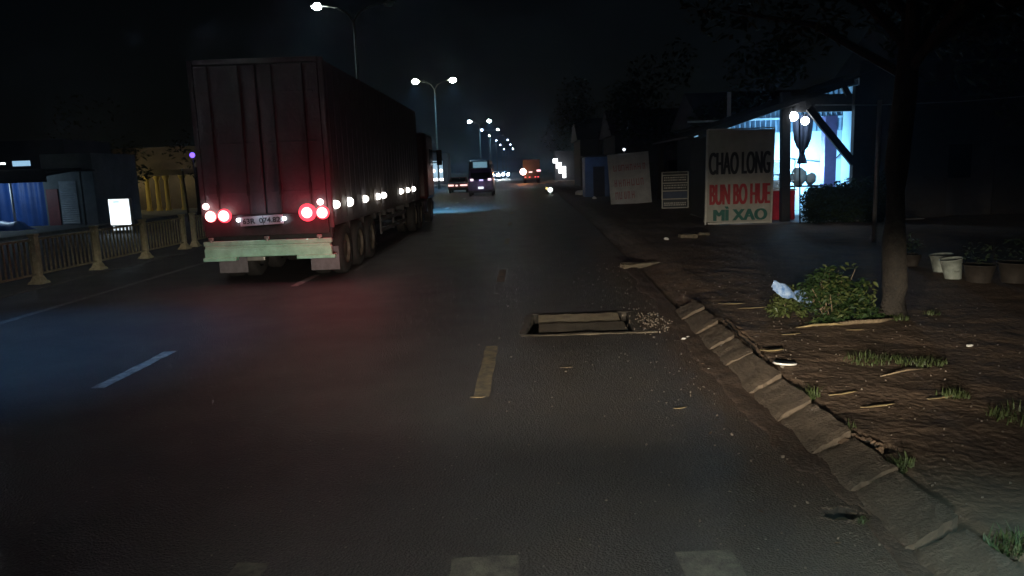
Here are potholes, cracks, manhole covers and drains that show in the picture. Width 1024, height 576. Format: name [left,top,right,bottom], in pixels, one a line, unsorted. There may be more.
pothole [814,505,871,524]
